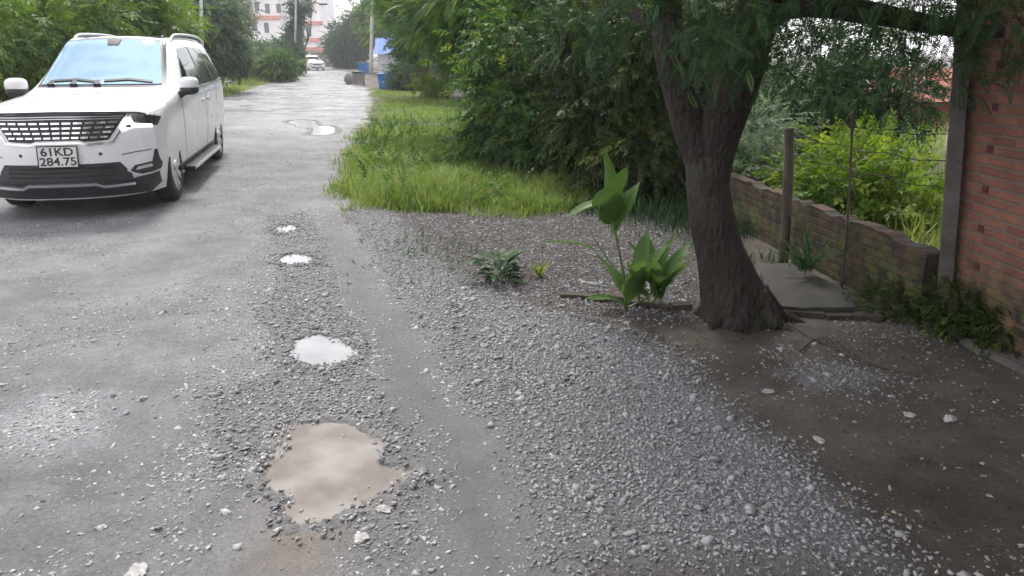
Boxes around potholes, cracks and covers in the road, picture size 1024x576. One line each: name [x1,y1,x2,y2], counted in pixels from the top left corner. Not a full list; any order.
pothole [281,119,343,136]
pothole [269,223,302,234]
pothole [271,251,320,267]
pothole [243,412,431,536]
pothole [278,330,370,371]
